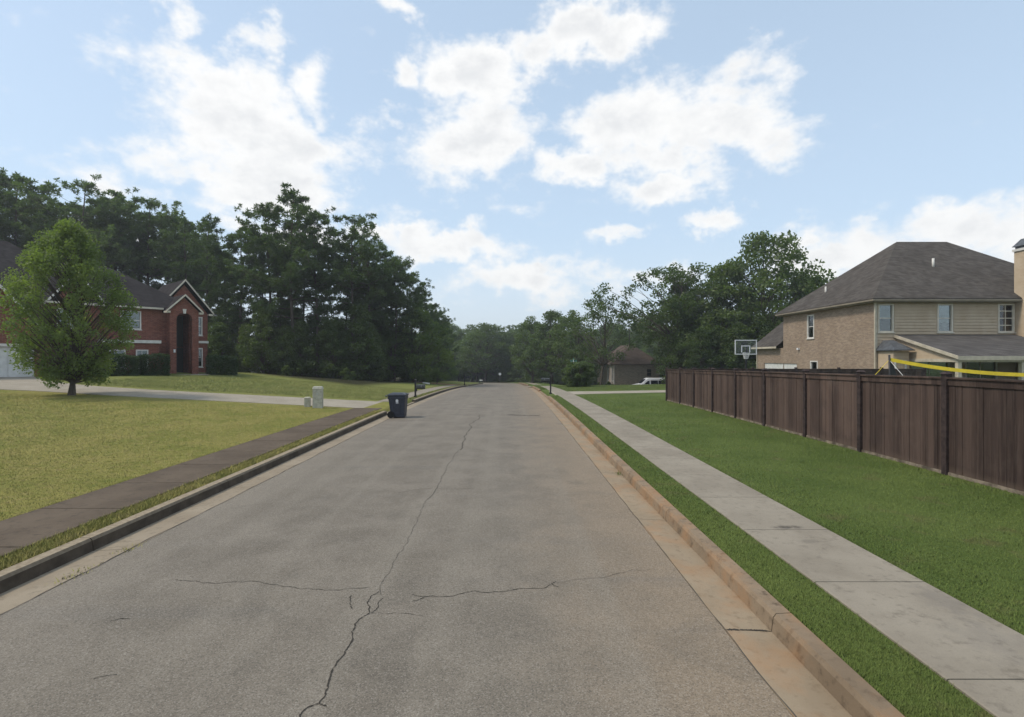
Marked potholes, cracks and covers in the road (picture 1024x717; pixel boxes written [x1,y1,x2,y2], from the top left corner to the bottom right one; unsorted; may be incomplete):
crack [176,414,621,717]
